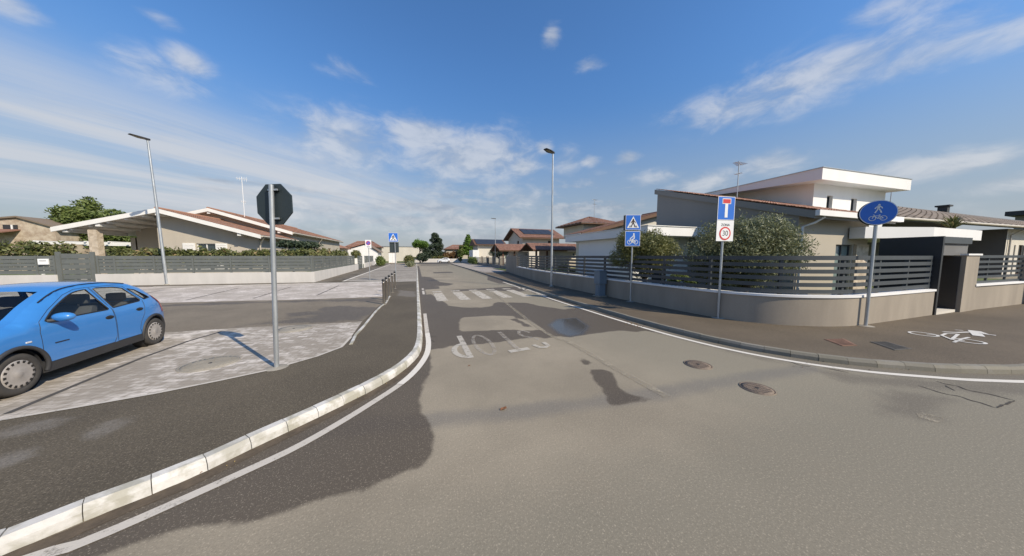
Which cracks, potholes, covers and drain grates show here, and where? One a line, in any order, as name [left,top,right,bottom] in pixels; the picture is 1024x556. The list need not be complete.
manhole cover [739,382,776,396]
manhole cover [684,360,713,370]
manhole cover [175,355,241,373]
